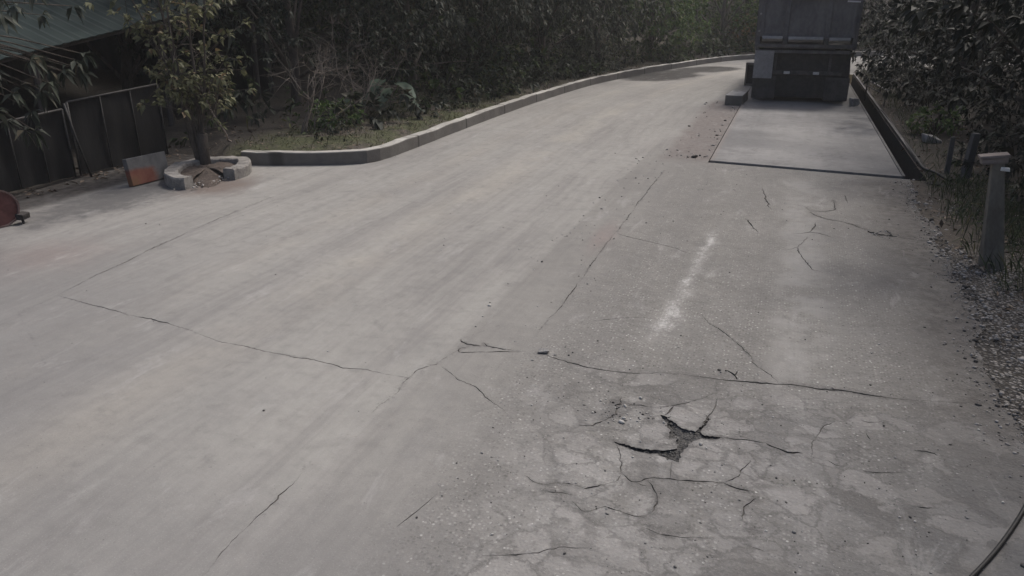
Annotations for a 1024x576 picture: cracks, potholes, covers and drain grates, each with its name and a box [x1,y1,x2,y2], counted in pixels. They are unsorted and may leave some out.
crack [492,390,844,556]
pothole [615,415,721,462]
crack [68,298,389,375]
crack [205,483,294,574]
crack [538,179,677,333]
crack [540,319,954,403]
crack [385,340,518,403]
crack [786,196,922,271]
